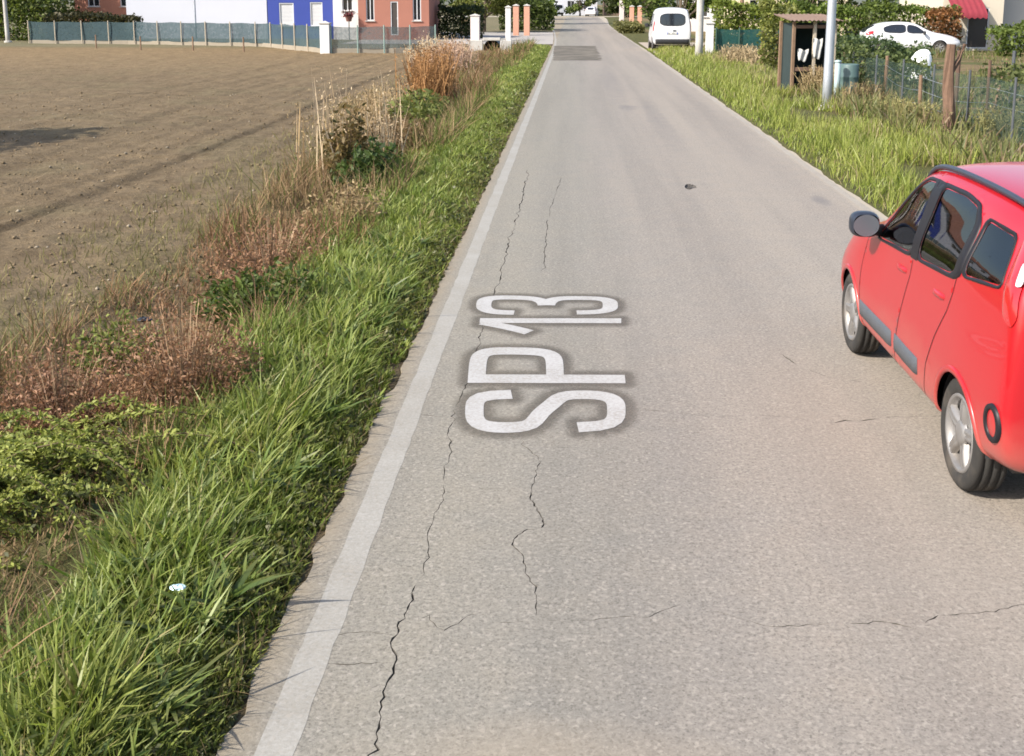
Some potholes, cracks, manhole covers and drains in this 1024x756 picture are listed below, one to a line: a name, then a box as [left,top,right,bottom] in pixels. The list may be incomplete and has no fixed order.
crack [328,171,1023,756]
